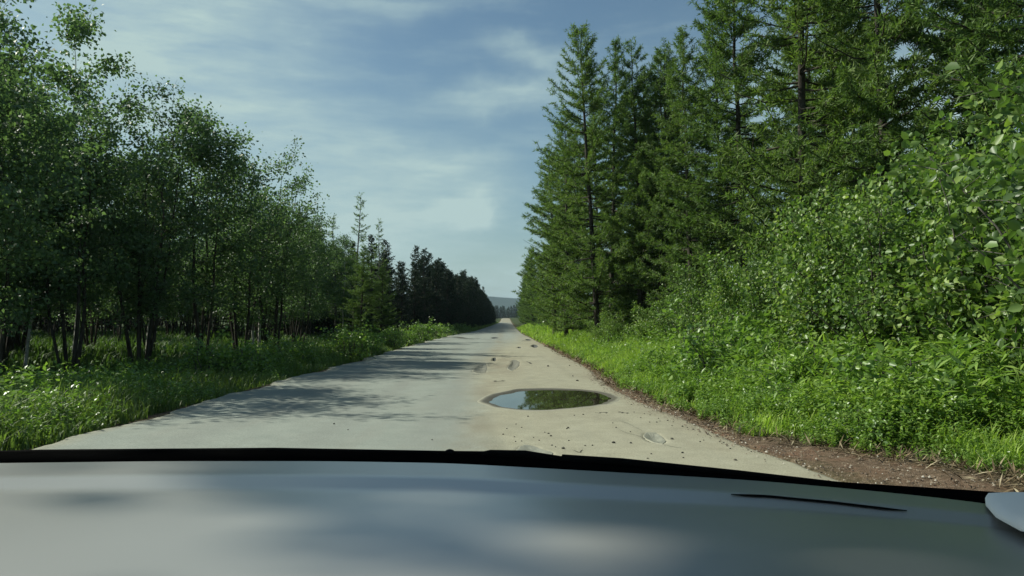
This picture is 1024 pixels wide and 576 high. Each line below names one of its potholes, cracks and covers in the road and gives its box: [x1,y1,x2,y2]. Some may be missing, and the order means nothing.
pothole [477,388,621,411]
pothole [643,432,666,444]
pothole [472,363,487,374]
